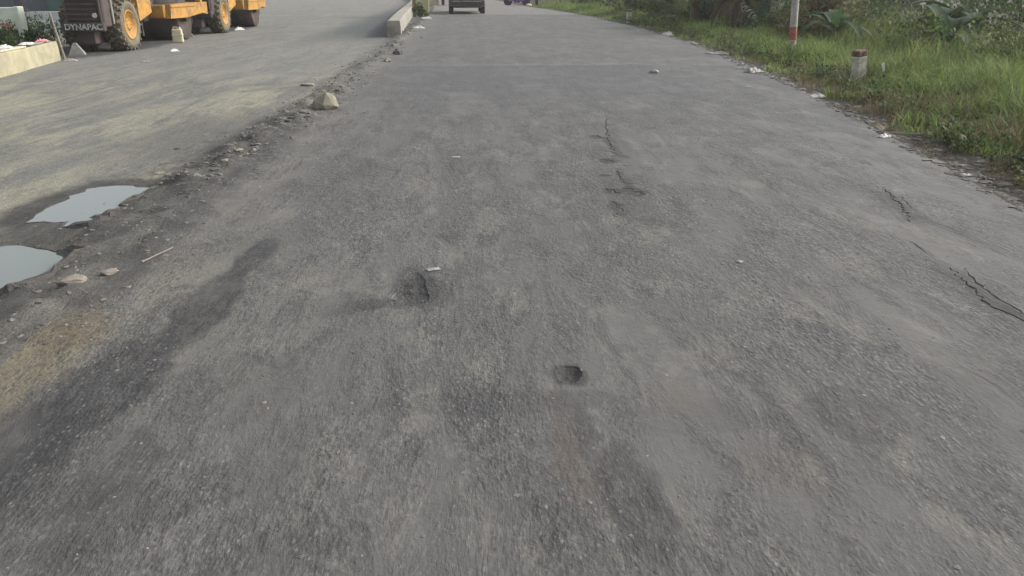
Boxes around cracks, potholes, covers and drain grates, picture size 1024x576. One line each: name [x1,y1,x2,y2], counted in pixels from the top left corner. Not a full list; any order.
pothole [390,272,430,306]
crack [884,189,912,222]
crack [591,120,643,217]
pothole [556,366,583,383]
crack [912,242,1024,322]
pothole [0,245,88,296]
pothole [25,182,159,229]
